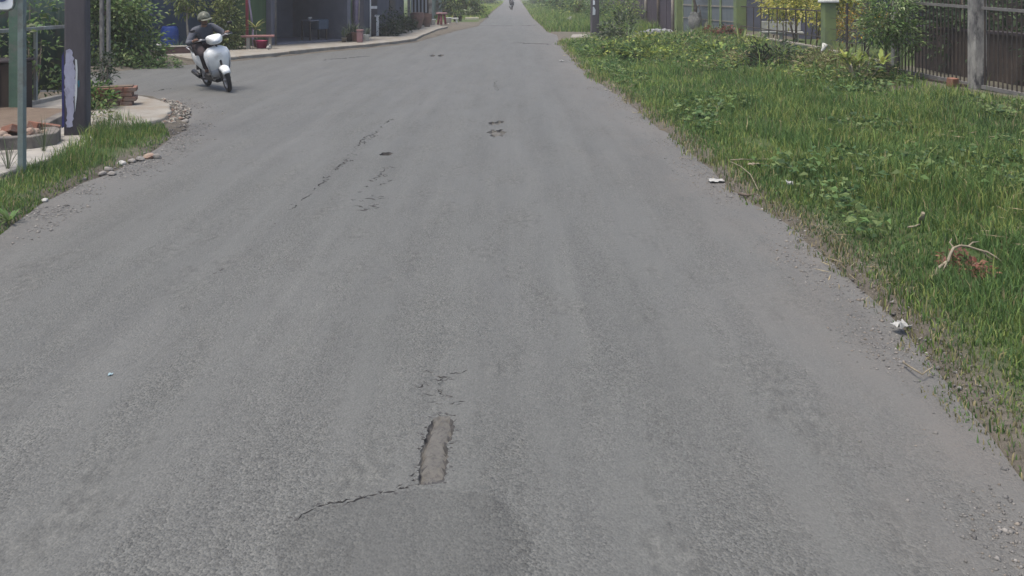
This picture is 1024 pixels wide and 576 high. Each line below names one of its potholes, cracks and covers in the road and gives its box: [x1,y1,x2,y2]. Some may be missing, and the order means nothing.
crack [212,119,394,274]
crack [287,370,467,521]
pothole [418,416,455,485]
